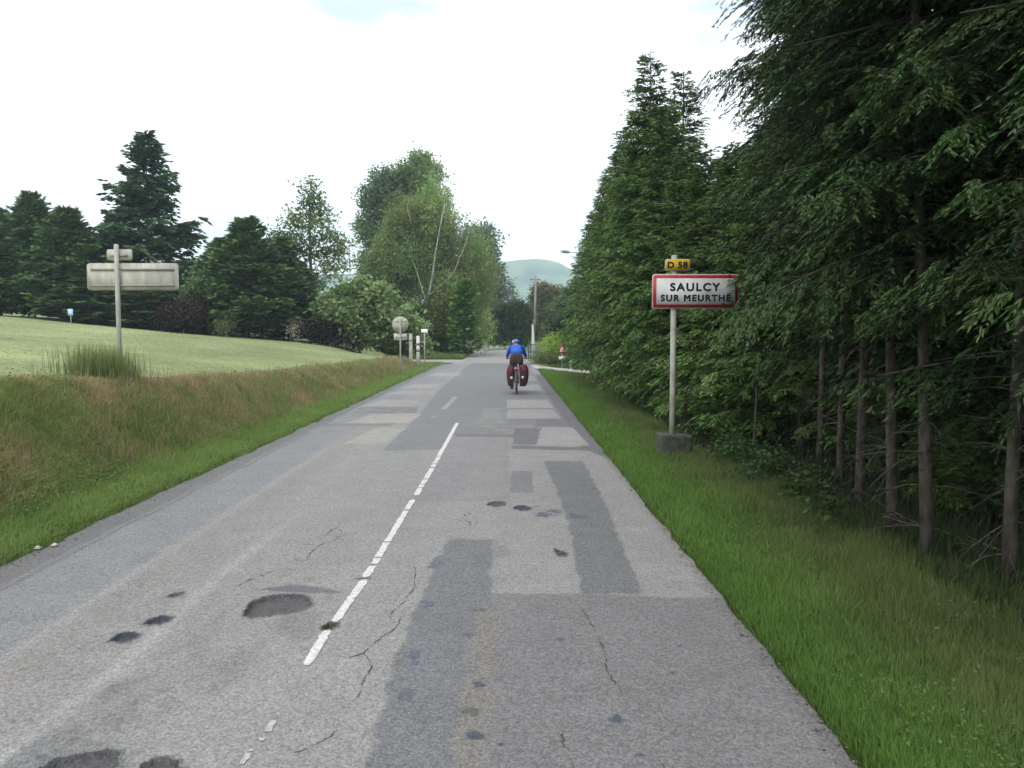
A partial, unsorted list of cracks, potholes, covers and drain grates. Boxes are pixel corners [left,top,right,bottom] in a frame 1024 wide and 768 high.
crack [582,609,621,688]
pothole [137,755,189,768]
crack [351,568,416,697]
pothole [240,593,315,619]
pothole [139,614,175,626]
pothole [36,746,126,768]
pothole [104,631,143,644]
